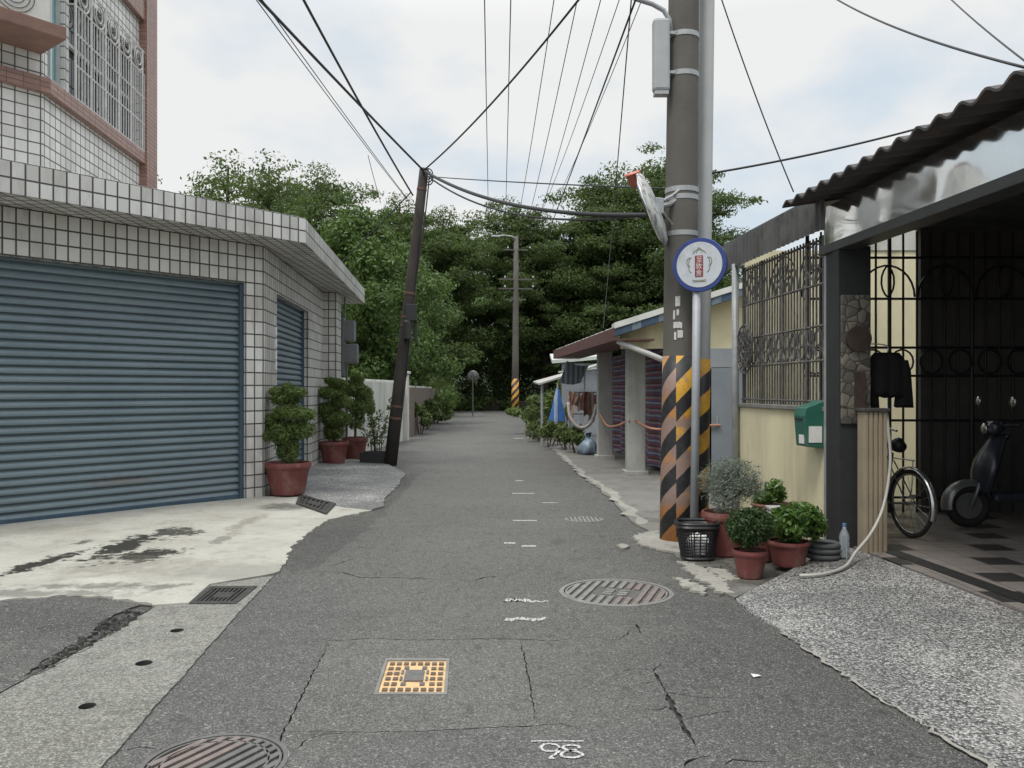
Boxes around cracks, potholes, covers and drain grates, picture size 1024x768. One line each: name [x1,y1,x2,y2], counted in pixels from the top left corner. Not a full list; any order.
drain grate [296,495,336,515]
crack [623,664,769,767]
manhole cover [560,579,673,607]
manhole cover [139,733,289,768]
crack [294,558,442,580]
manhole cover [374,658,450,695]
pothole [23,605,154,676]
